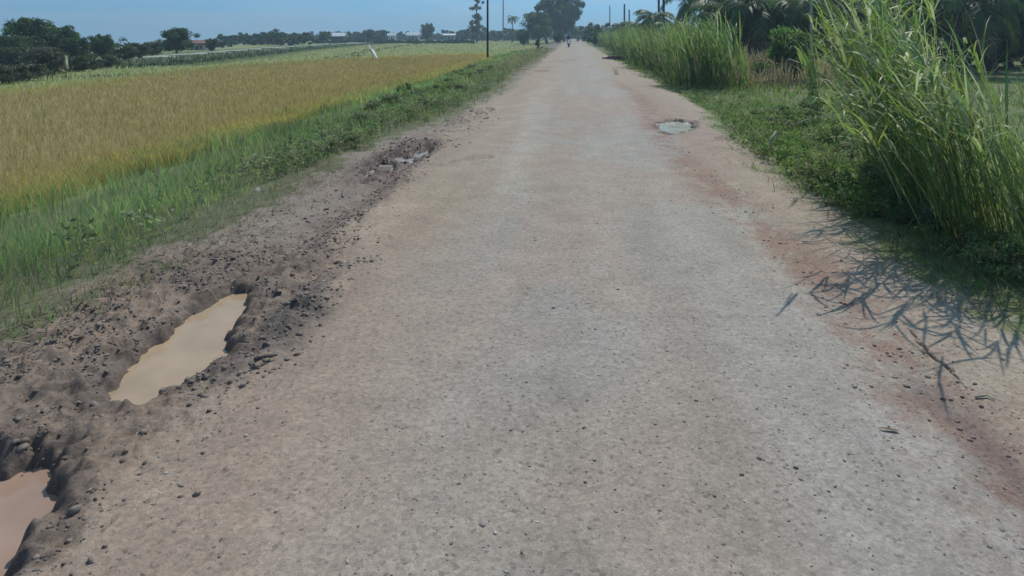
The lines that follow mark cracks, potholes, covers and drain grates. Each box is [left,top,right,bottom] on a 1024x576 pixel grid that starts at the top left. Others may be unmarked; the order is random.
pothole [344,138,440,184]
pothole [0,428,99,576]
pothole [651,118,700,134]
pothole [74,281,266,411]
